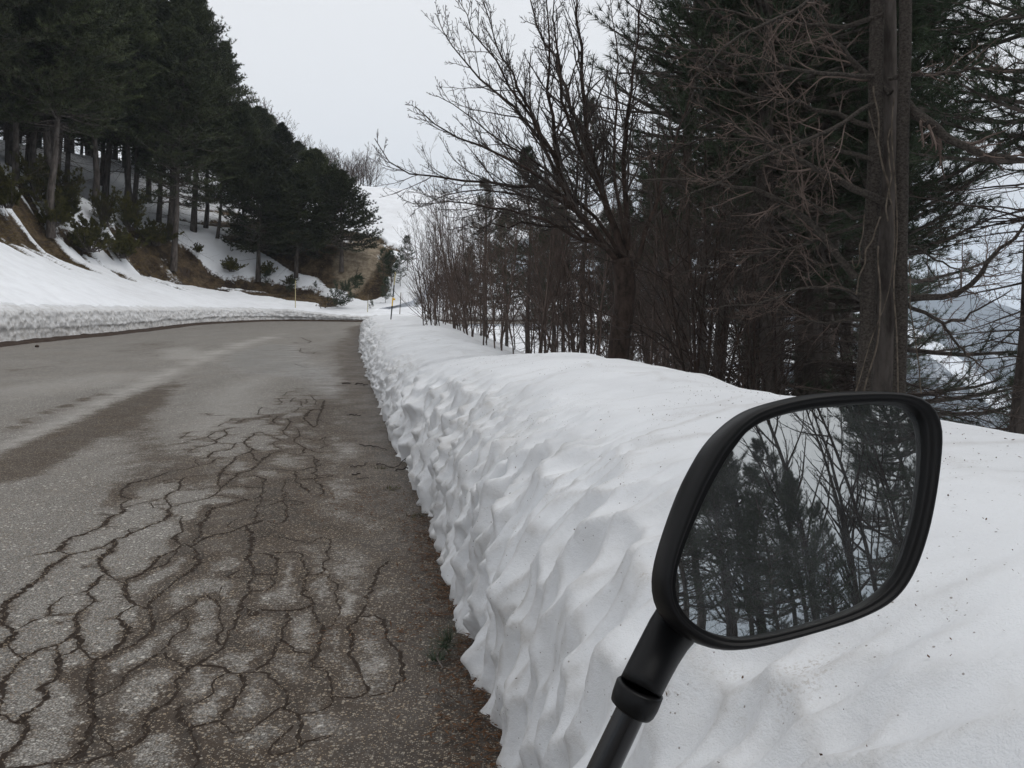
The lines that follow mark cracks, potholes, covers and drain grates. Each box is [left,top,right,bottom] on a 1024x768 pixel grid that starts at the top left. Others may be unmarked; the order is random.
crack [0,392,406,768]
